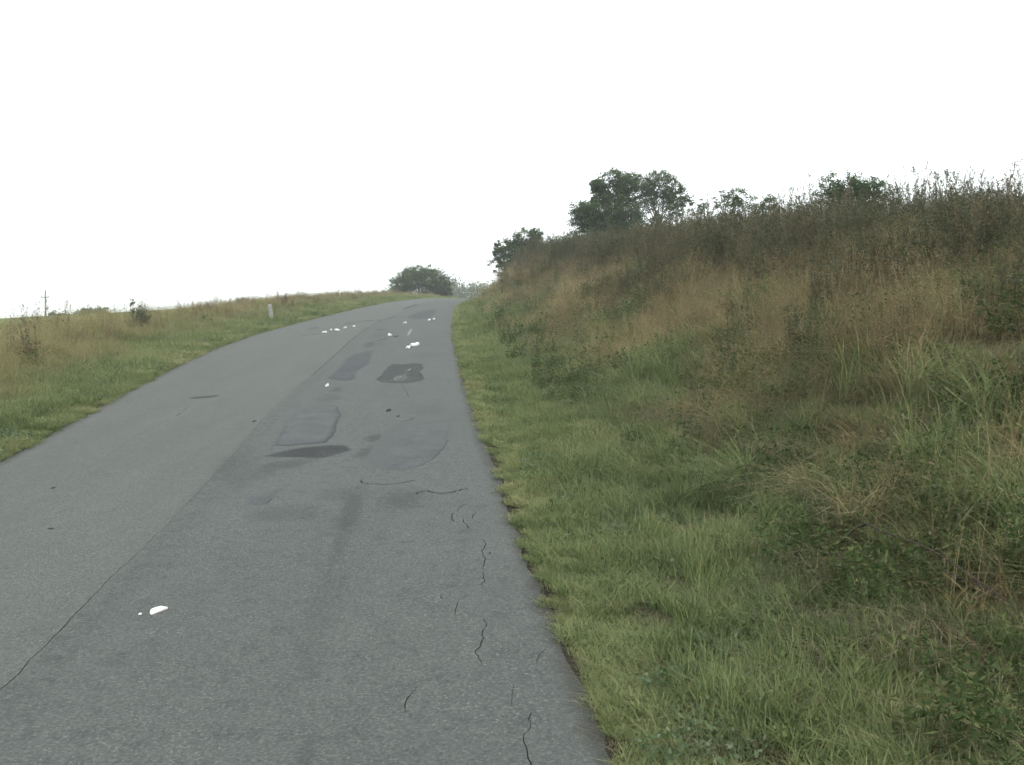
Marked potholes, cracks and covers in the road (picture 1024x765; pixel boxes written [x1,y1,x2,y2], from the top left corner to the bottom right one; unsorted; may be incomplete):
pothole [376,363,425,384]
crack [360,480,487,586]
crack [511,685,532,765]
crack [475,619,487,665]
